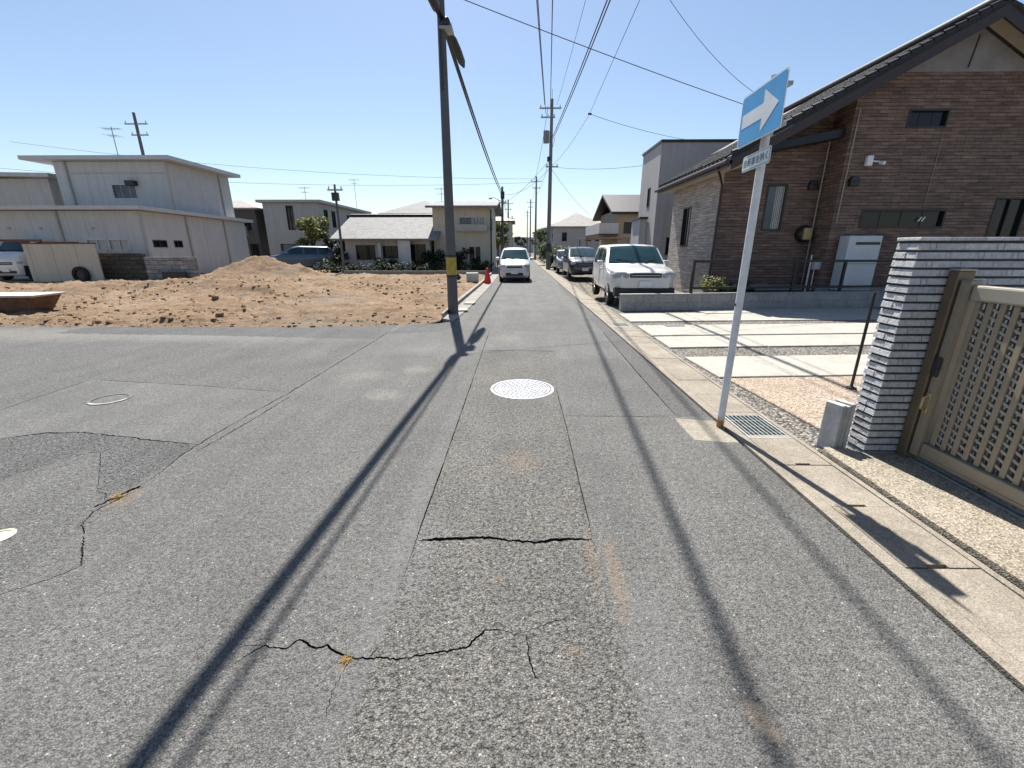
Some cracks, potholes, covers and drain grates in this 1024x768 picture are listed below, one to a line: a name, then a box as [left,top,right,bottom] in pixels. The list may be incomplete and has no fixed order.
manhole cover [491,379,554,399]
manhole cover [86,393,133,405]
crack [418,536,592,544]
utility cover [0,528,17,542]
crack [239,620,557,717]
drain grate [725,415,792,438]
crack [65,453,140,533]
